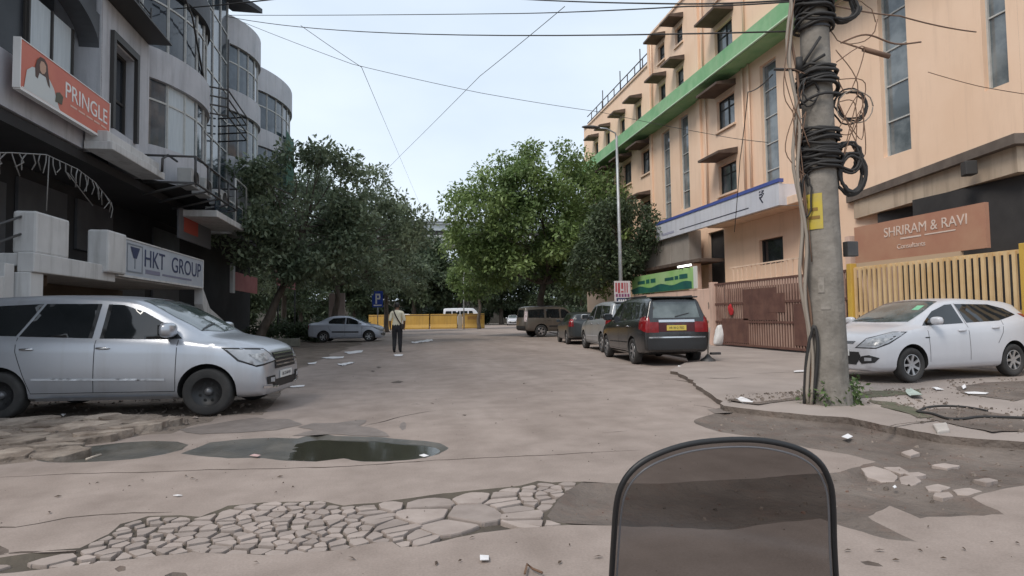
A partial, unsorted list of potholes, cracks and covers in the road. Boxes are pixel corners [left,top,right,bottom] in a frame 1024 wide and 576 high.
crack [0,450,632,574]
pothole [181,434,448,462]
